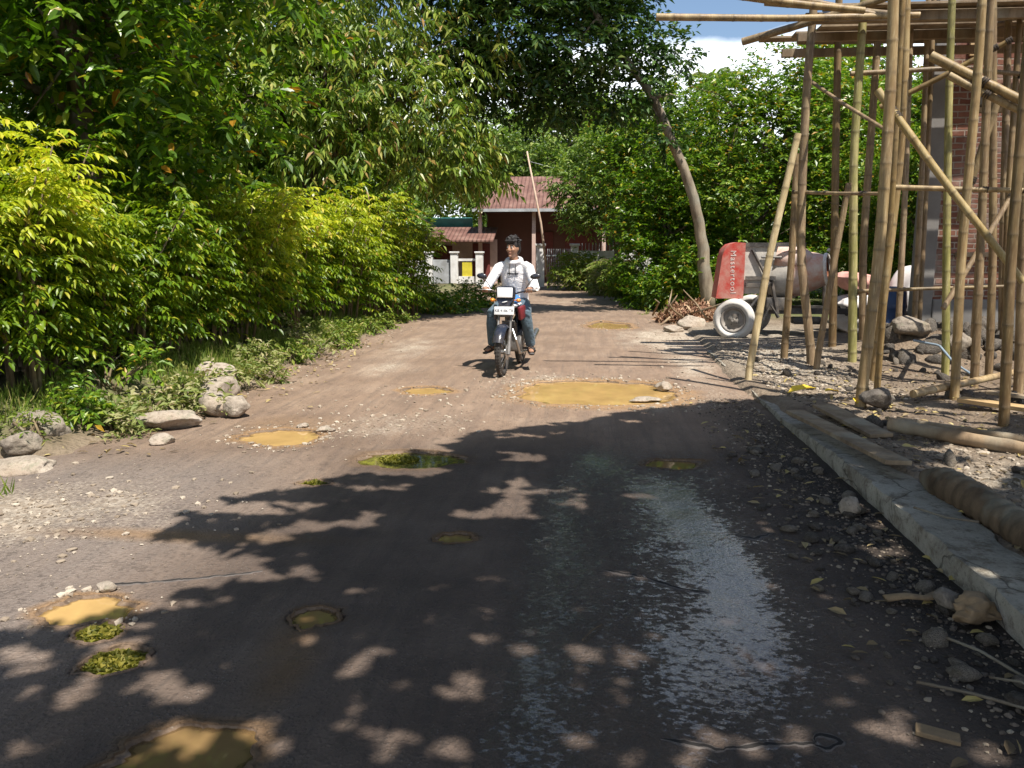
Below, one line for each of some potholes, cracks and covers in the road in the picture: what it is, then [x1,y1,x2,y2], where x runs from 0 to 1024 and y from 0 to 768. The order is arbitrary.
pothole [350,449,475,471]
pothole [432,531,480,545]
pothole [582,321,636,330]
pothole [294,478,334,487]
pothole [505,379,689,408]
crack [114,571,262,586]
pothole [27,592,146,628]
pothole [69,621,127,645]
pothole [229,427,326,448]
pothole [286,604,343,632]
pothole [70,642,155,678]
crack [660,732,846,753]
